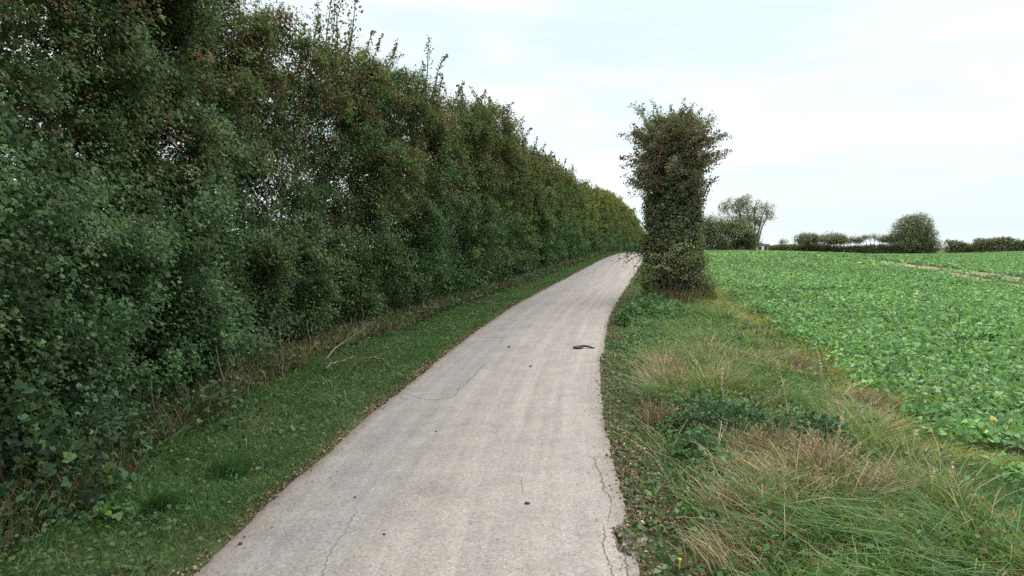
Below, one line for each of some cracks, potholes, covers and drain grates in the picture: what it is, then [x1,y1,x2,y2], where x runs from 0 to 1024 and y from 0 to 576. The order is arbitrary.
crack [594,458,630,576]
